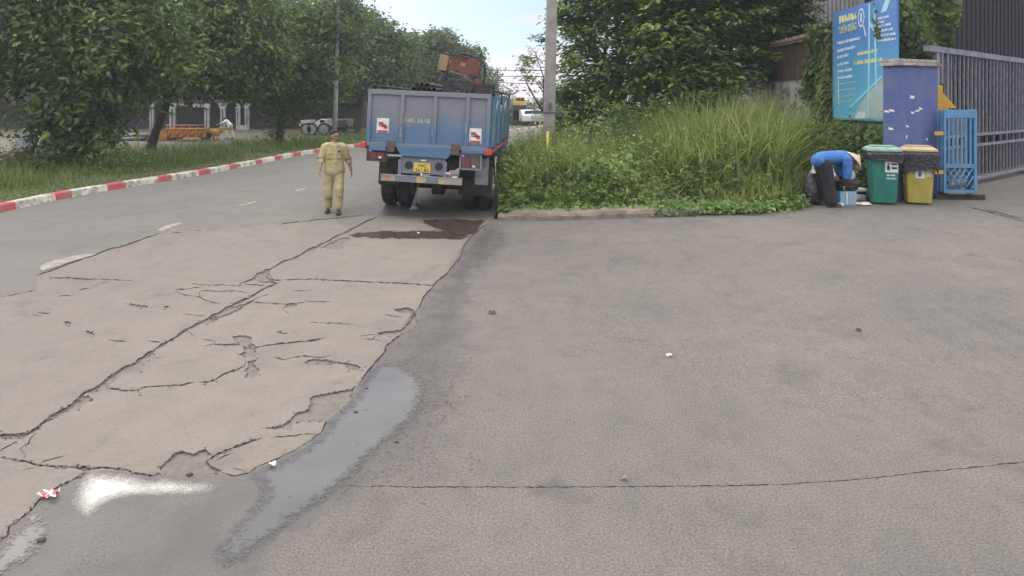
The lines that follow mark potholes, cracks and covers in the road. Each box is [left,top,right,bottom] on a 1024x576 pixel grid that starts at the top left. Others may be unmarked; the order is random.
crack [0,217,434,477]
